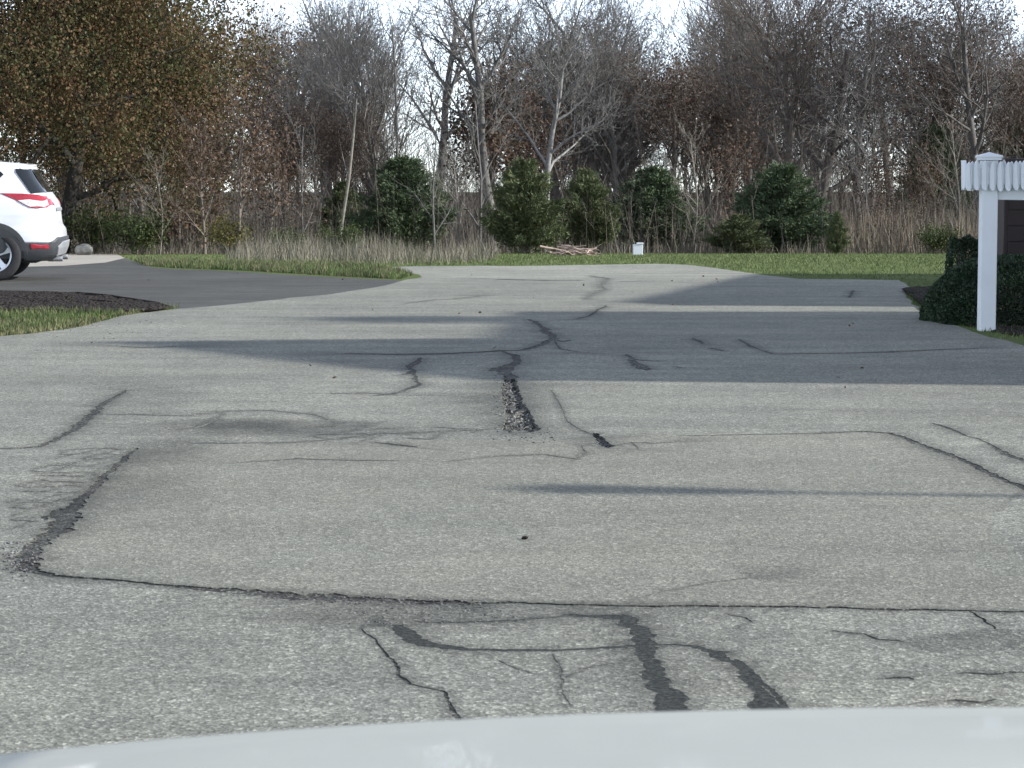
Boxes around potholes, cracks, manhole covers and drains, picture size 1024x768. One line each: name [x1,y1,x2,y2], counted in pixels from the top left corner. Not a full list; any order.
crack [625,354,651,370]
pothole [499,376,540,433]
crack [0,390,501,530]
crack [361,629,461,720]
crack [698,423,1024,490]
crack [832,630,904,642]
crack [552,654,593,704]
crack [692,338,953,354]
